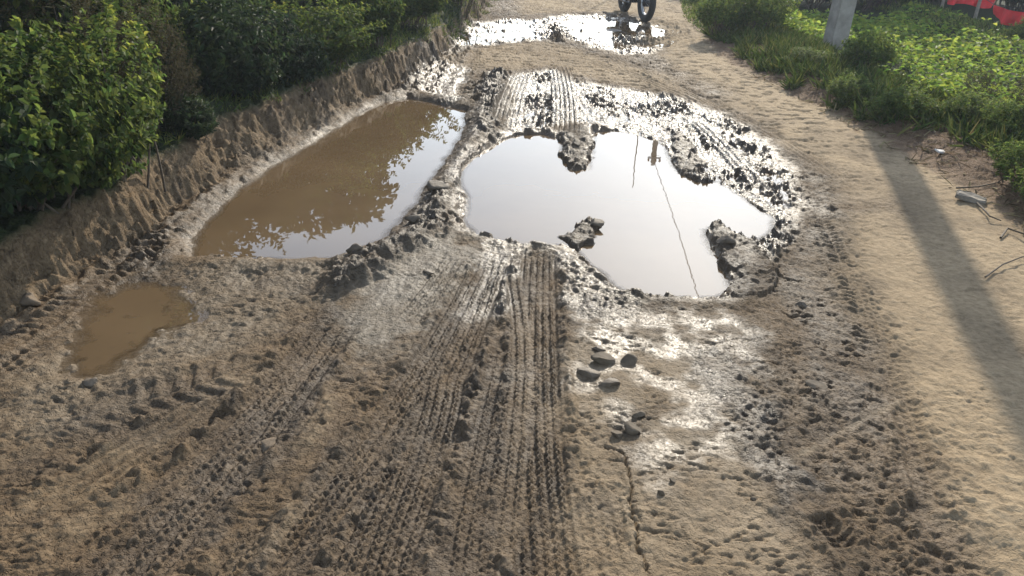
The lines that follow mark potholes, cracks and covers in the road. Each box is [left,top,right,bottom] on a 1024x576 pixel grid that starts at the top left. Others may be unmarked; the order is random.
crack [598,441,655,576]
pothole [451,94,810,300]
pothole [538,14,685,54]
pothole [56,276,221,382]
pothole [176,92,474,259]
pothole [453,17,555,47]
